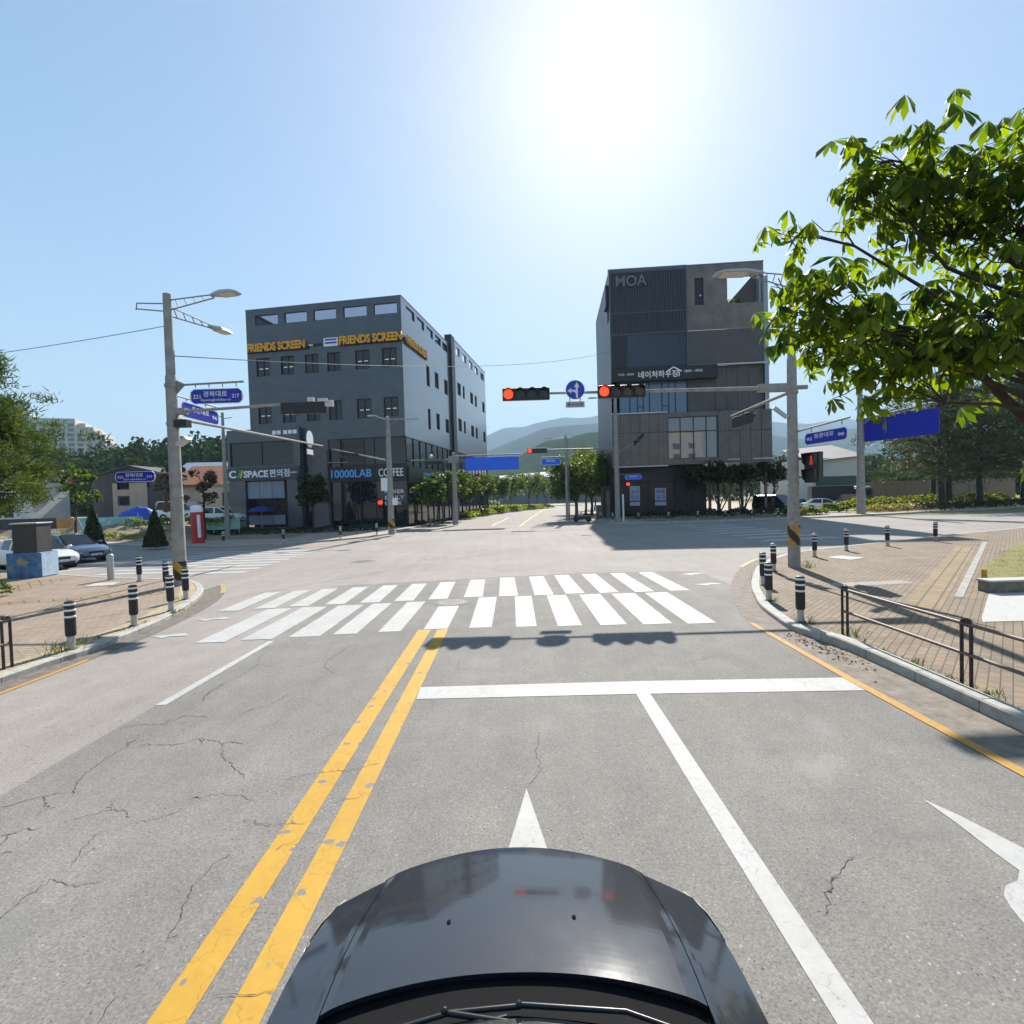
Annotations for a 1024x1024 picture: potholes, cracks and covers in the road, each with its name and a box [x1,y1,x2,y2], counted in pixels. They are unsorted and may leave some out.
crack [0,659,271,853]
crack [0,835,99,918]
crack [823,856,854,913]
crack [165,855,229,942]
manhole cover [434,598,470,606]
